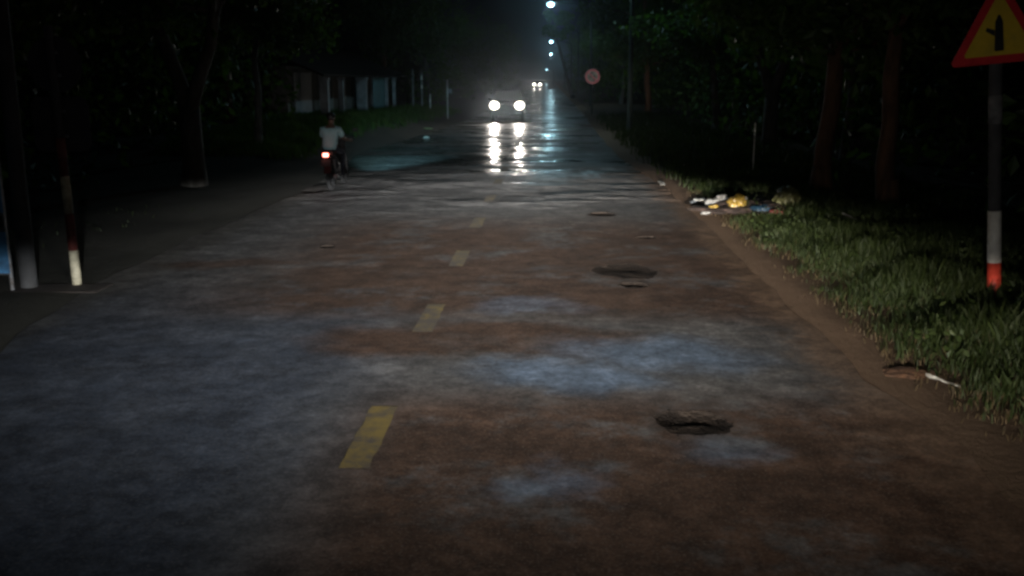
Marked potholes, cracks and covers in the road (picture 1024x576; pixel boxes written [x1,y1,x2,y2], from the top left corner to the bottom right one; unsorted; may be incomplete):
pothole [588,263,658,279]
pothole [653,410,734,436]
